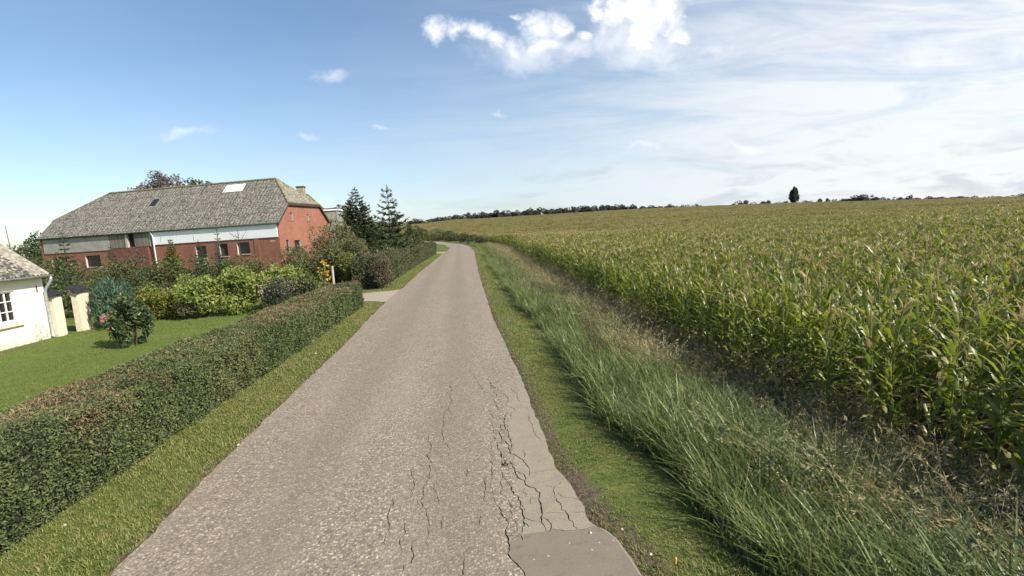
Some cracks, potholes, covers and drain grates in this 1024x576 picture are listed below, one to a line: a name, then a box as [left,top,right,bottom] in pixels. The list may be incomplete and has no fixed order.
crack [384,383,452,572]
crack [466,366,595,576]
